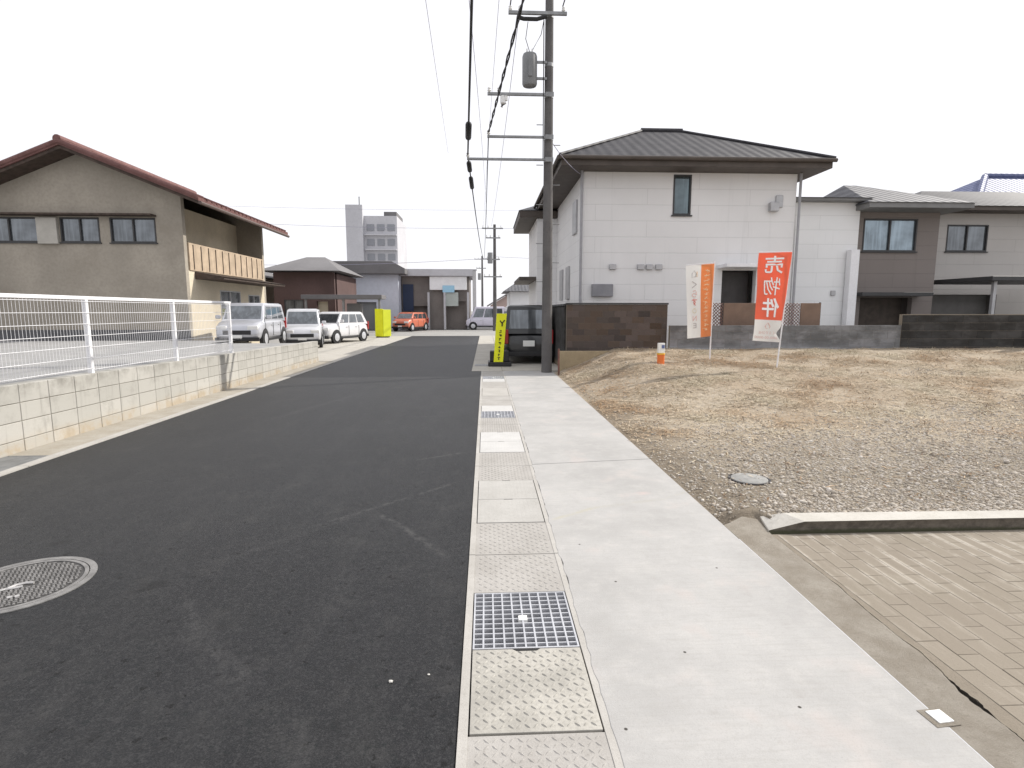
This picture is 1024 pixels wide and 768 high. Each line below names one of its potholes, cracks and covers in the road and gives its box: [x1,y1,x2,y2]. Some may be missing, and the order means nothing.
drain grate [473,591,580,650]
crack [789,548,1024,741]
manhole cover [0,556,98,614]
